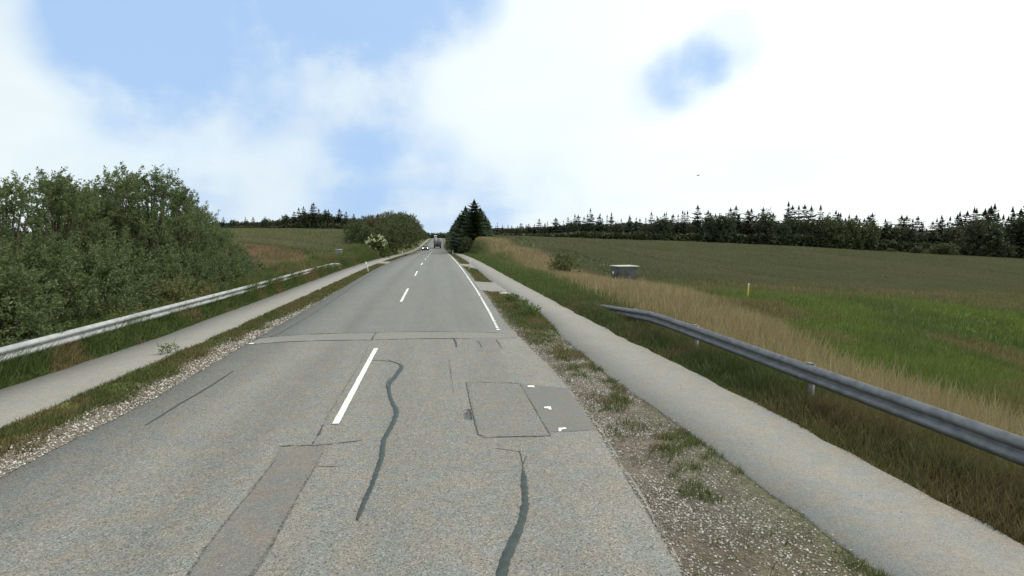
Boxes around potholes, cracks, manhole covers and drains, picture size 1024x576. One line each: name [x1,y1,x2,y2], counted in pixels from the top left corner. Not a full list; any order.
crack [186,331,501,576]
